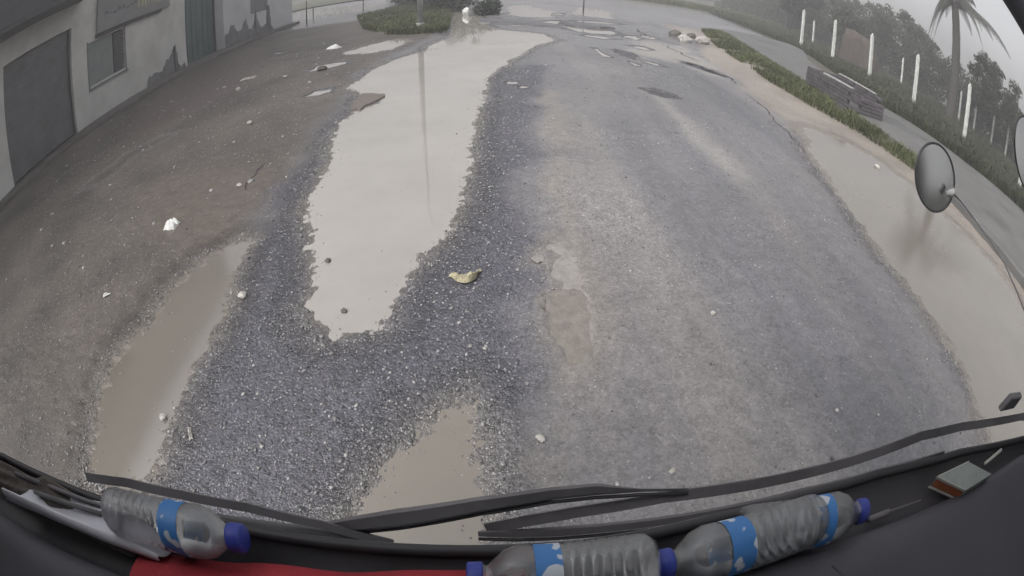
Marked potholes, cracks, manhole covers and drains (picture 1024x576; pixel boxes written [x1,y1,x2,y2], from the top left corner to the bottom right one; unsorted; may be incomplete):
pothole [680,61,734,80]
pothole [299,86,336,98]
pothole [637,87,683,99]
pothole [627,57,670,68]
pothole [303,60,354,73]
crack [621,29,808,155]
